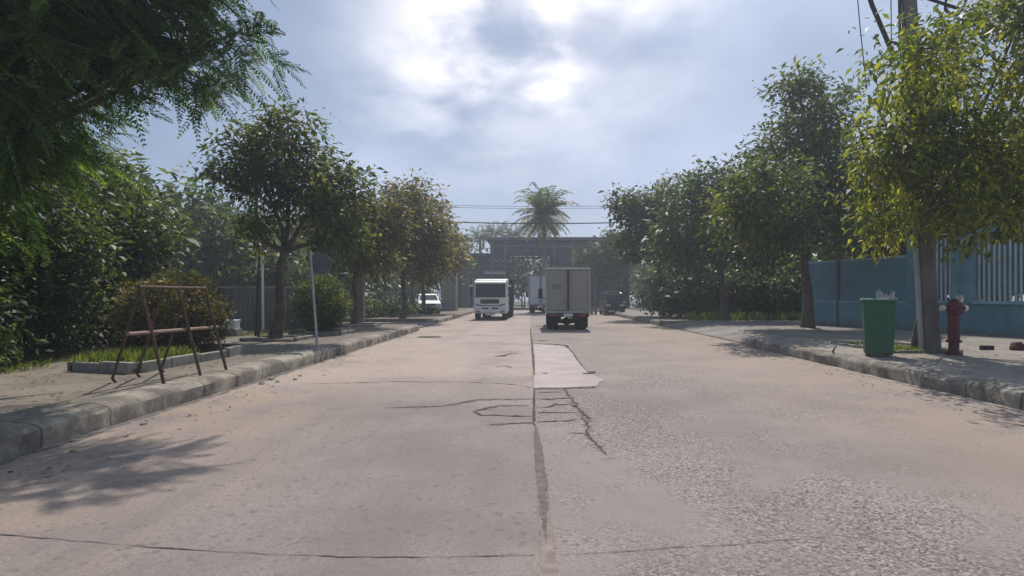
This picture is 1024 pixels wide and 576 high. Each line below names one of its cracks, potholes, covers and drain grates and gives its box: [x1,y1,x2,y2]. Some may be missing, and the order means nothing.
crack [393,340,611,459]
